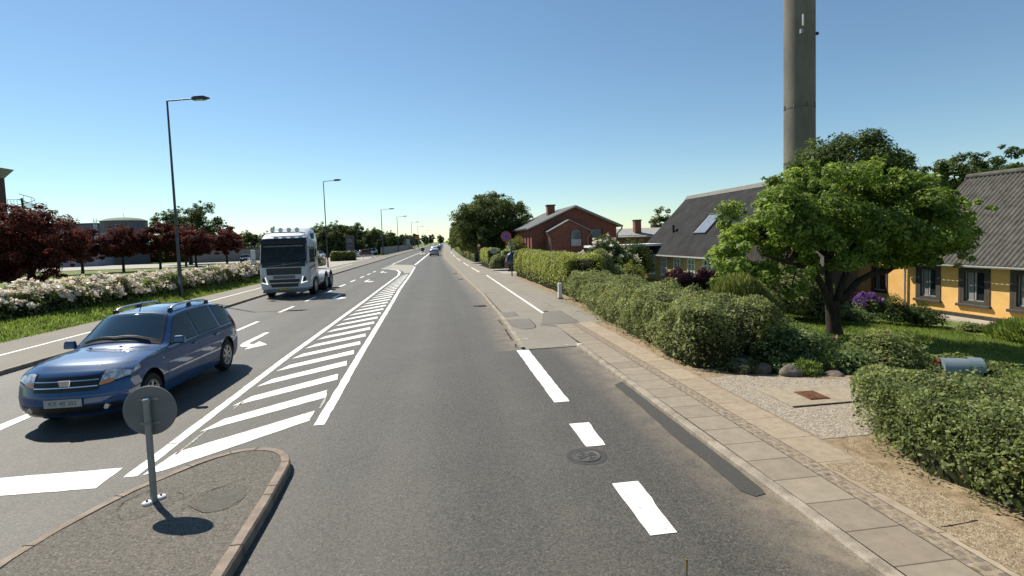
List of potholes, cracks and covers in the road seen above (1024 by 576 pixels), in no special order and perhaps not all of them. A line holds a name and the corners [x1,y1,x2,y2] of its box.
manhole cover [566,448,608,465]
